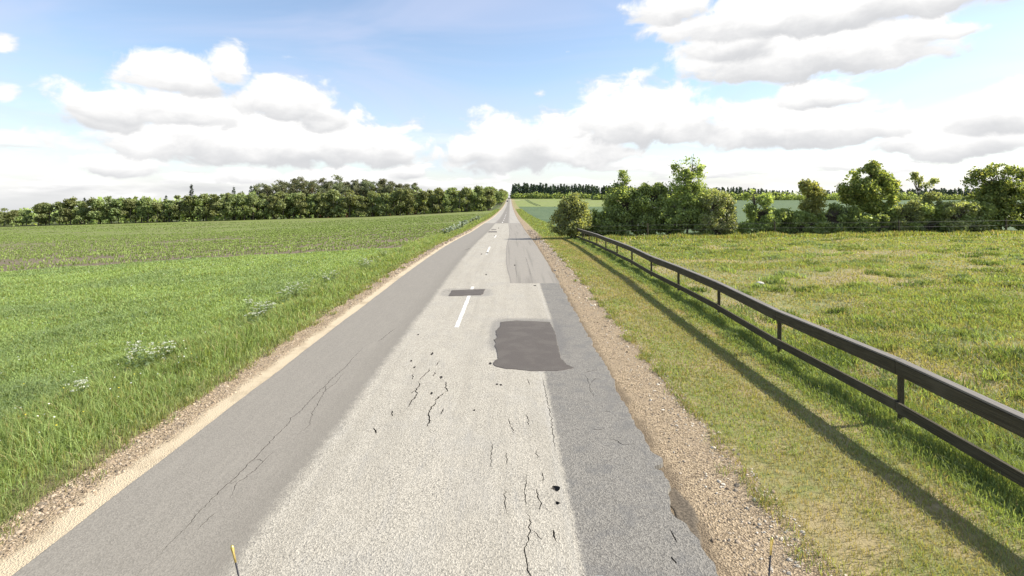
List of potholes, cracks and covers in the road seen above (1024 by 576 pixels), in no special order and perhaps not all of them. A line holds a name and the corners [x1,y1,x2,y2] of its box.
crack [143,353,358,569]
crack [373,363,448,433]
crack [524,449,557,576]
